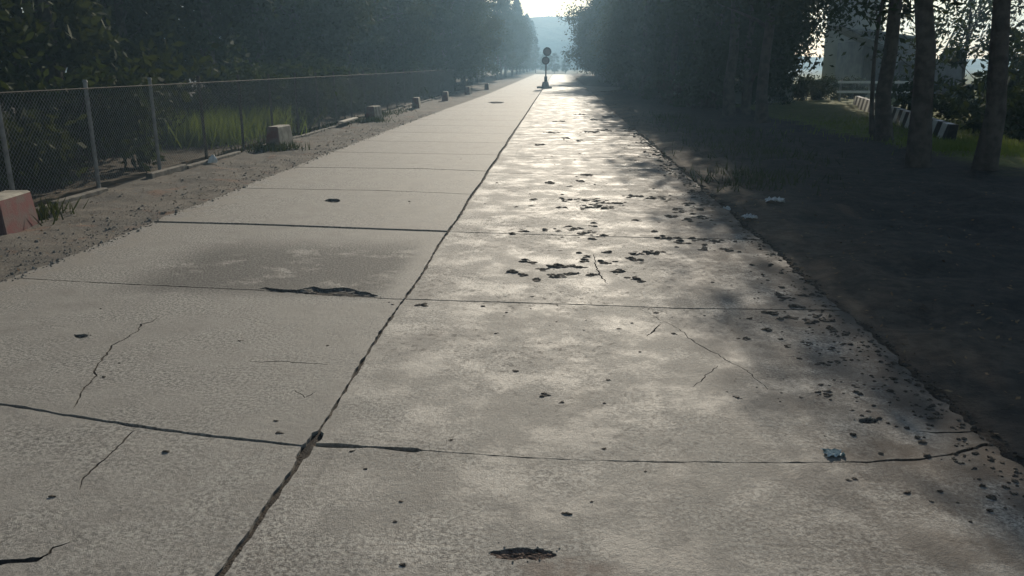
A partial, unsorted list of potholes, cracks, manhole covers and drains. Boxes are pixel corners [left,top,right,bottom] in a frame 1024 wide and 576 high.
crack [79,432,132,490]
crack [0,543,67,565]
crack [74,317,158,407]
pothole [262,287,376,298]
crack [644,311,766,387]
pothole [490,549,556,561]
